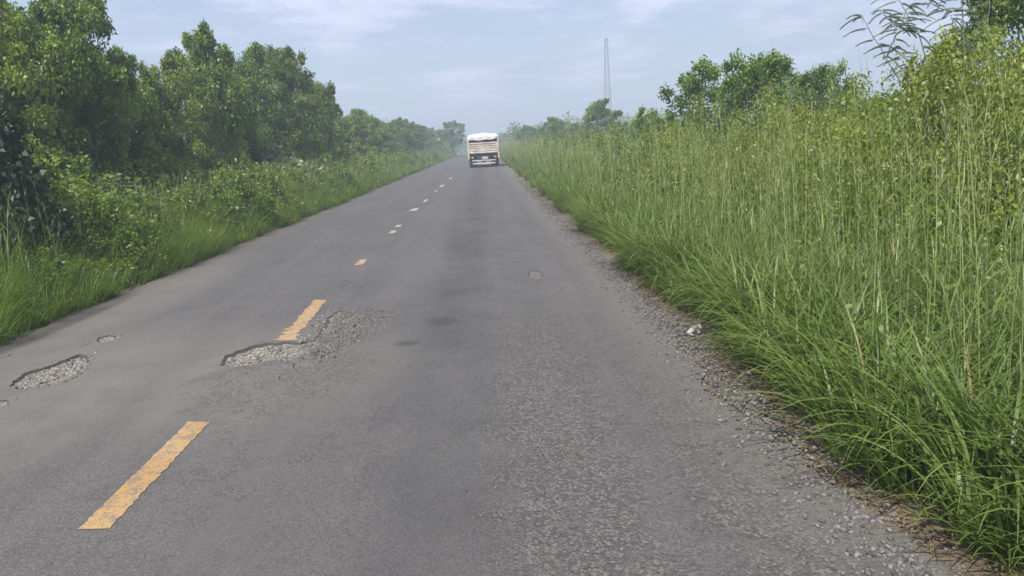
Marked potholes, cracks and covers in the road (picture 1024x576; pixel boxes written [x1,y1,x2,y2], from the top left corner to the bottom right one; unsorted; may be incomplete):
pothole [9,351,98,390]
pothole [97,334,121,343]
pothole [220,305,395,371]
